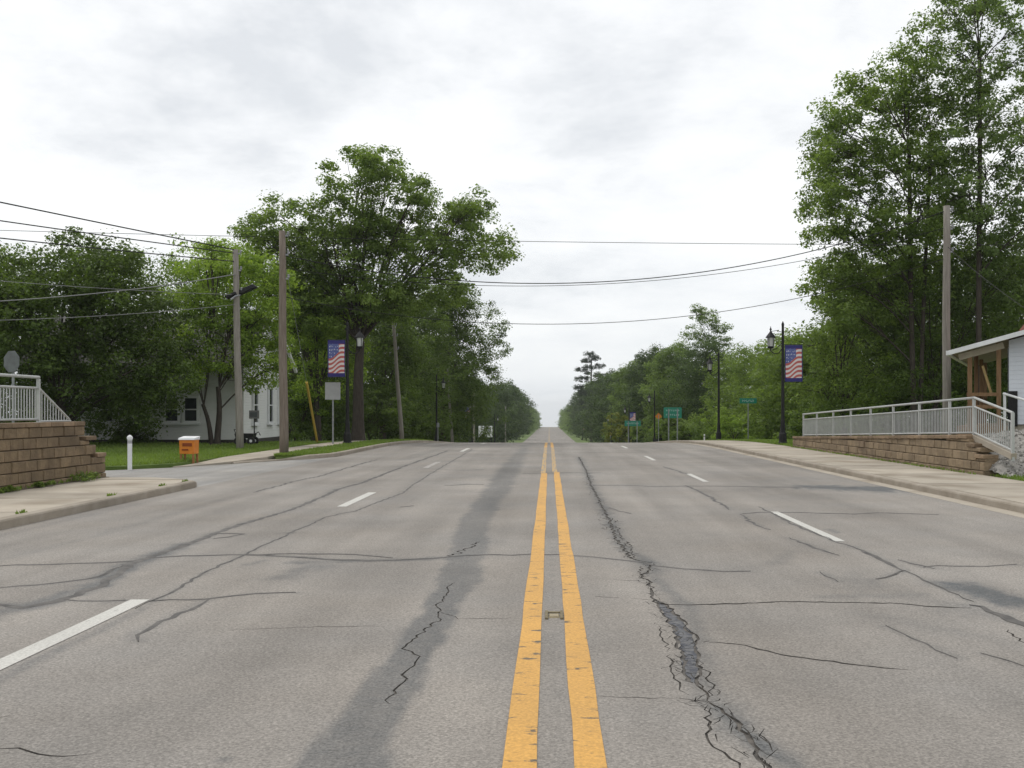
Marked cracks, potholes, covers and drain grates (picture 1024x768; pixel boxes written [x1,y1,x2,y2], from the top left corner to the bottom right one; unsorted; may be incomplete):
crack [385,582,505,704]
crack [980,630,1024,666]
crack [578,458,960,768]
